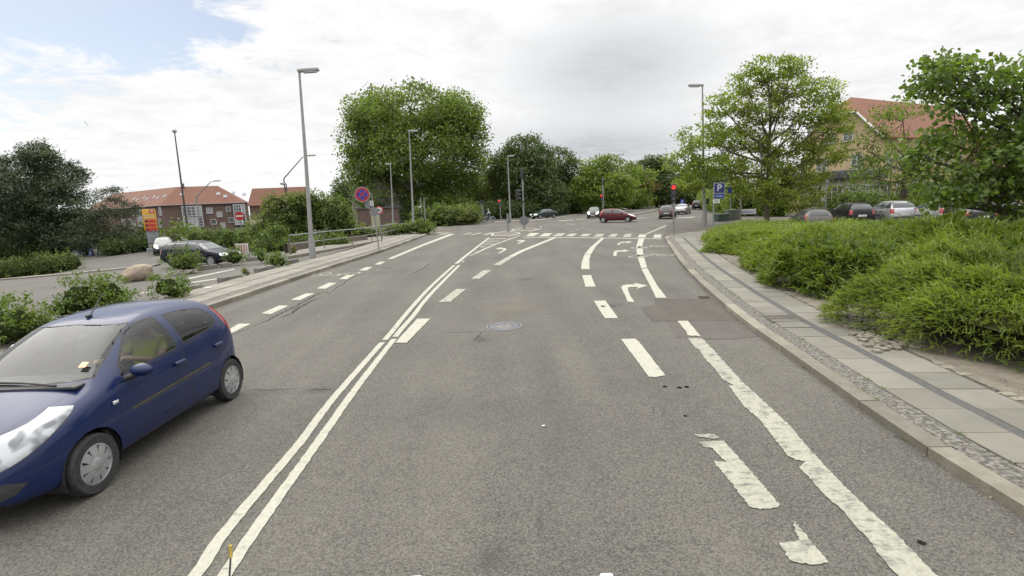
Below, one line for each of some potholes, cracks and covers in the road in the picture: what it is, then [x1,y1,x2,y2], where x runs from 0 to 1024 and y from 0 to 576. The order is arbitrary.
crack [235,274,361,334]
manhole cover [485,322,523,331]
